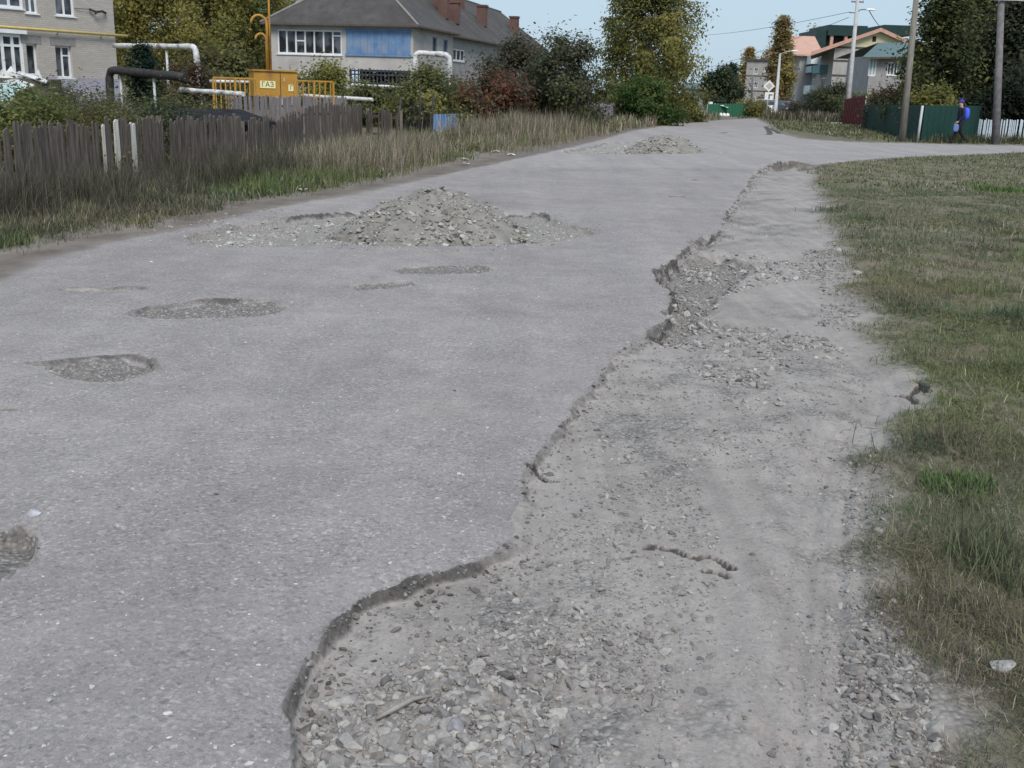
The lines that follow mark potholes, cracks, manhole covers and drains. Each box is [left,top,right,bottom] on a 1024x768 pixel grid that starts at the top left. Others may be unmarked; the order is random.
pothole [768,161,798,172]
pothole [123,297,290,321]
pothole [645,255,758,349]
pothole [0,520,46,581]
crack [889,379,933,405]
pothole [23,354,167,384]
pothole [383,264,507,275]
crack [641,542,739,580]
pothole [344,280,419,291]
